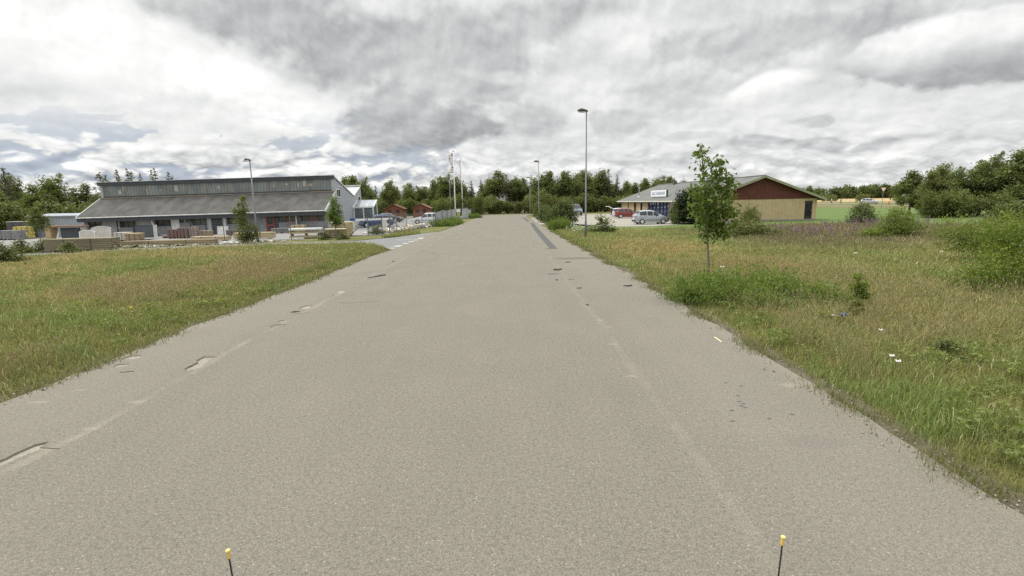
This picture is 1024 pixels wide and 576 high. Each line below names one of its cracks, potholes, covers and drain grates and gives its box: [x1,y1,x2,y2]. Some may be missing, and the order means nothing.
pothole [184,356,215,370]
